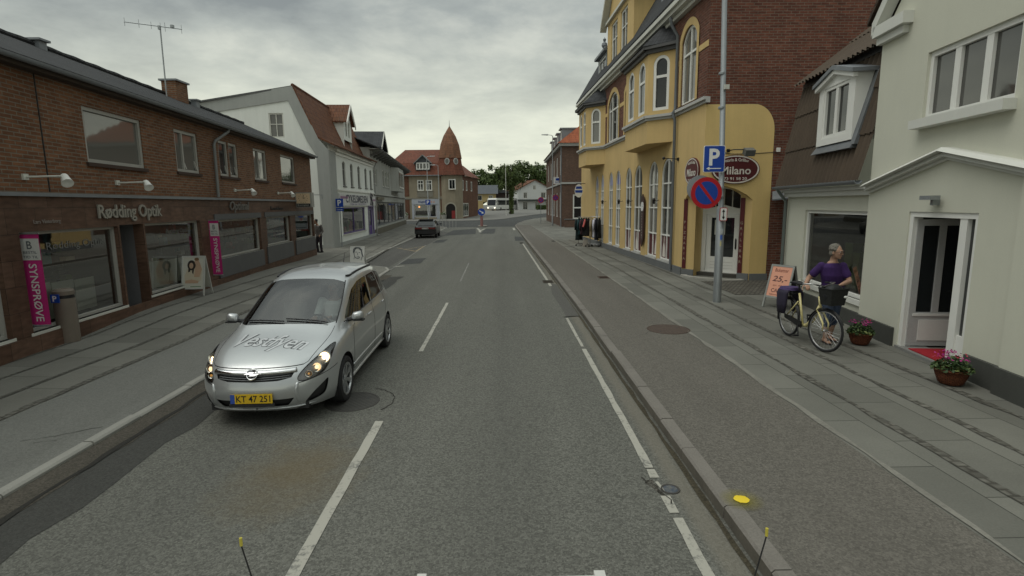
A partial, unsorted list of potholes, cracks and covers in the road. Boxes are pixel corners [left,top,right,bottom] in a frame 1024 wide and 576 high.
manhole cover [647,324,691,334]
utility cover [660,484,680,495]
manhole cover [324,392,380,412]
